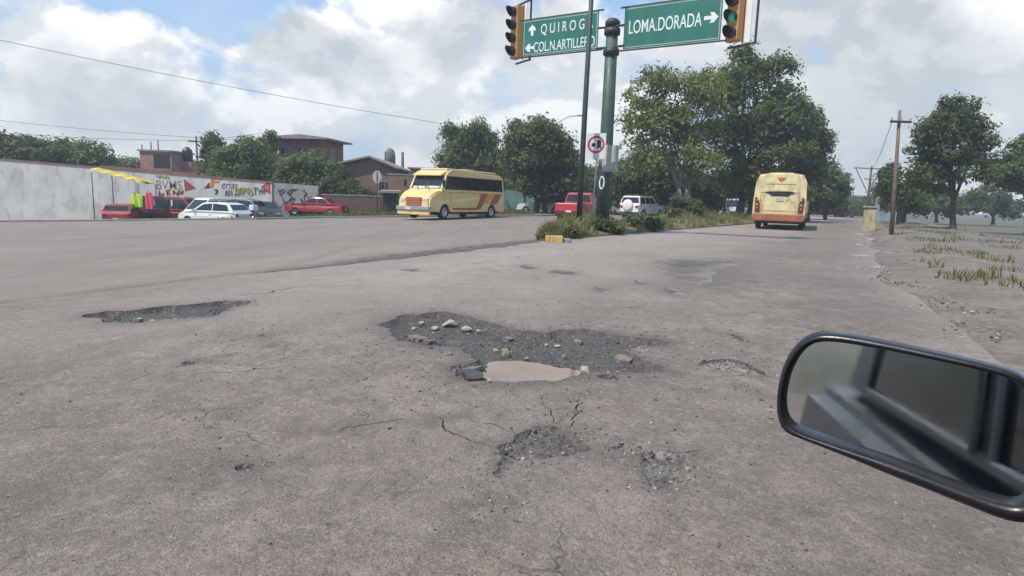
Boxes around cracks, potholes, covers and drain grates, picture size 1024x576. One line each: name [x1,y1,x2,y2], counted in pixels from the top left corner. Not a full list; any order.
pothole [699,359,765,375]
pothole [82,300,252,323]
crack [440,417,518,447]
pothole [378,311,670,383]
pothole [638,449,688,491]
pothole [492,425,591,476]
crack [542,401,586,427]
